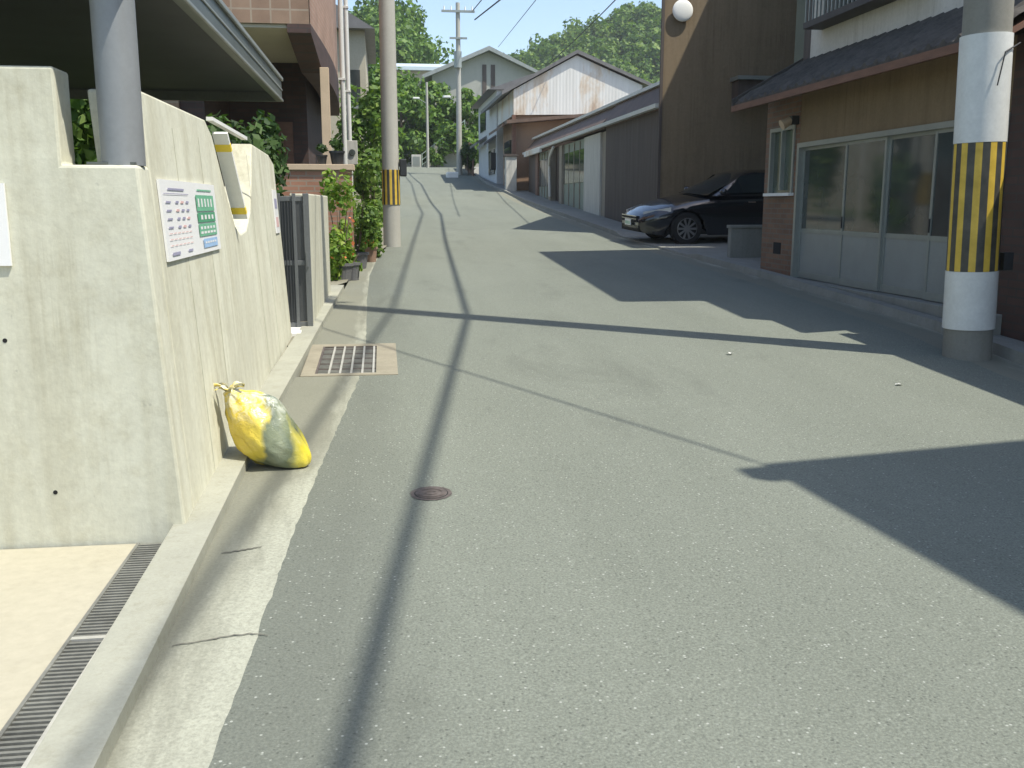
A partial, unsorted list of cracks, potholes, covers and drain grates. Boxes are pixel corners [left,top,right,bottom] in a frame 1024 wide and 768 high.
manhole cover [410,486,452,500]
drain grate [300,343,398,377]
crack [172,633,268,646]
drain grate [0,543,162,768]
